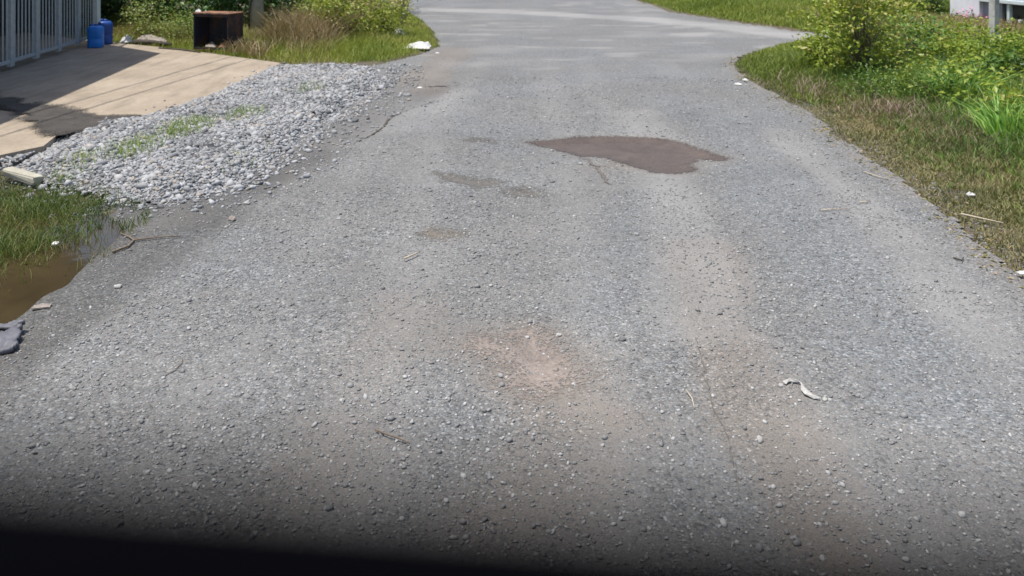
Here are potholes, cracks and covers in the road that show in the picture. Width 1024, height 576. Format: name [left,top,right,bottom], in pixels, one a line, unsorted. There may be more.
crack [352,85,447,144]
crack [585,157,612,185]
